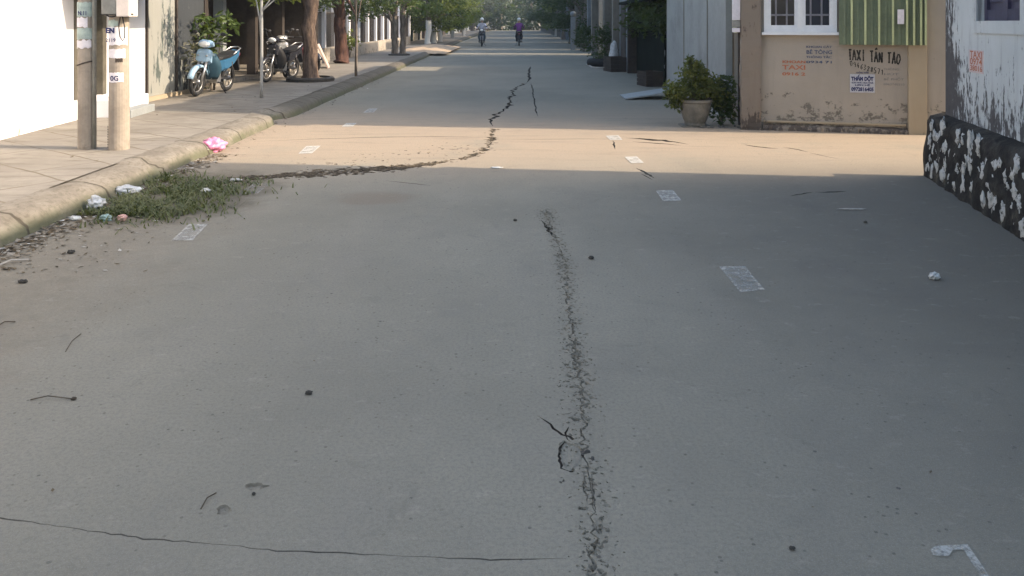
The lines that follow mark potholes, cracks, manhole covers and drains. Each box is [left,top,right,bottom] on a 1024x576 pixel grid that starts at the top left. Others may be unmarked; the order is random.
crack [0,209,635,576]
crack [239,67,576,185]
